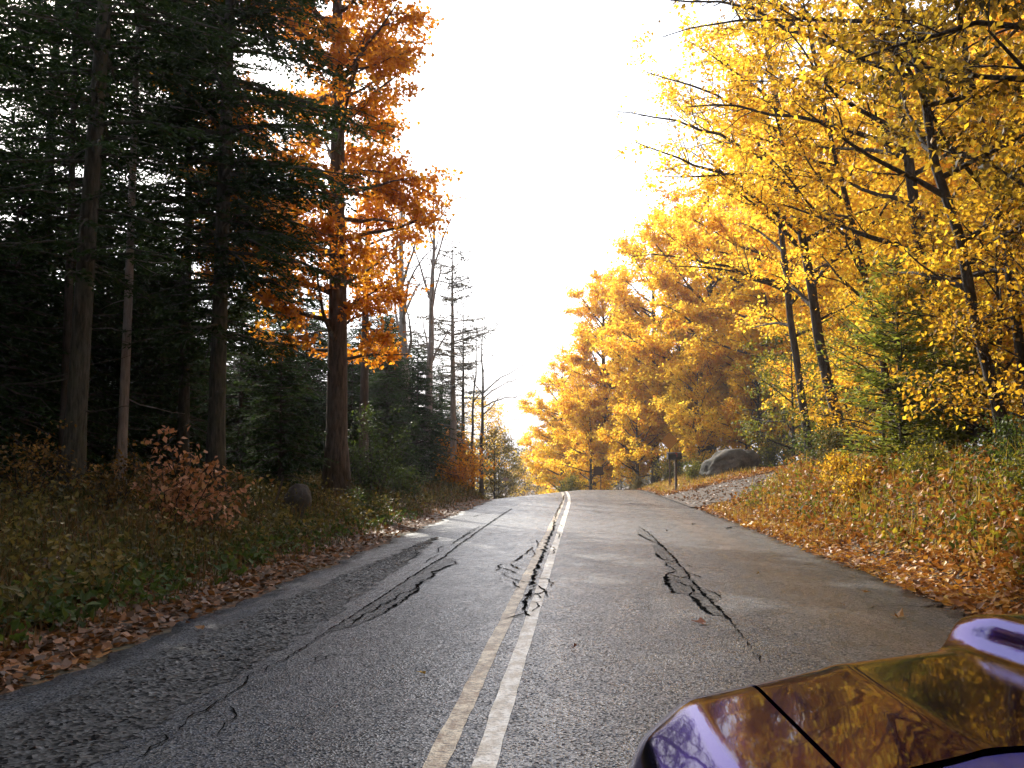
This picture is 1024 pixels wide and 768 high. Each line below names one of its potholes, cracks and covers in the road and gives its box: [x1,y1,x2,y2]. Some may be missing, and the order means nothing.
crack [347,512,490,628]
crack [123,628,368,768]
crack [496,495,564,618]
crack [637,527,762,662]
